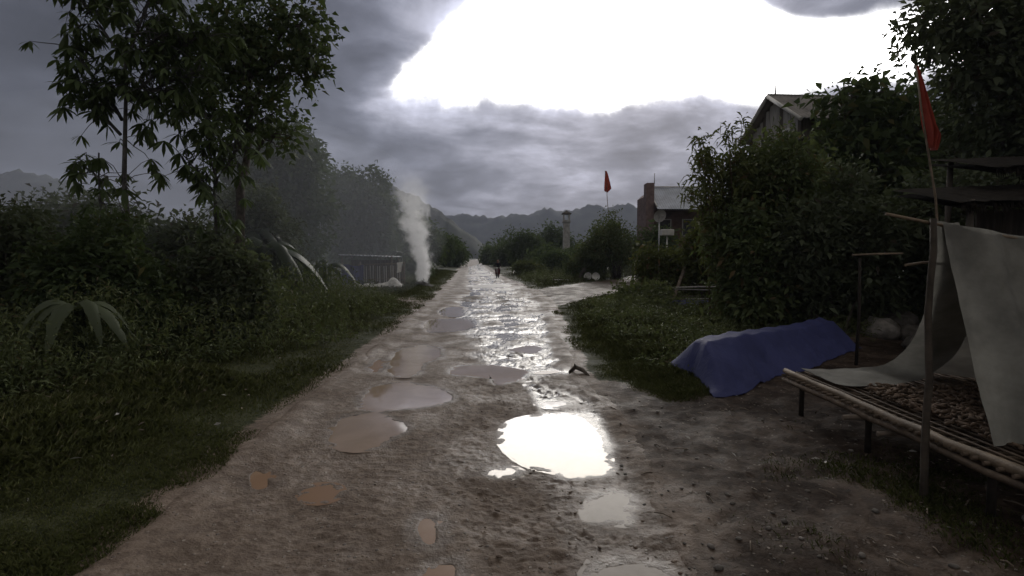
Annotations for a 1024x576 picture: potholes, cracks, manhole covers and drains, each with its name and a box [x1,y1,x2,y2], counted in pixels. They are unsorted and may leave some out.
pothole [436,306,465,319]
pothole [353,381,460,413]
pothole [320,411,416,453]
pothole [444,364,530,386]
pothole [496,412,617,480]
pothole [295,482,347,506]
pothole [235,466,284,494]
pothole [382,345,447,378]
pothole [482,466,525,480]
pothole [578,488,642,528]
